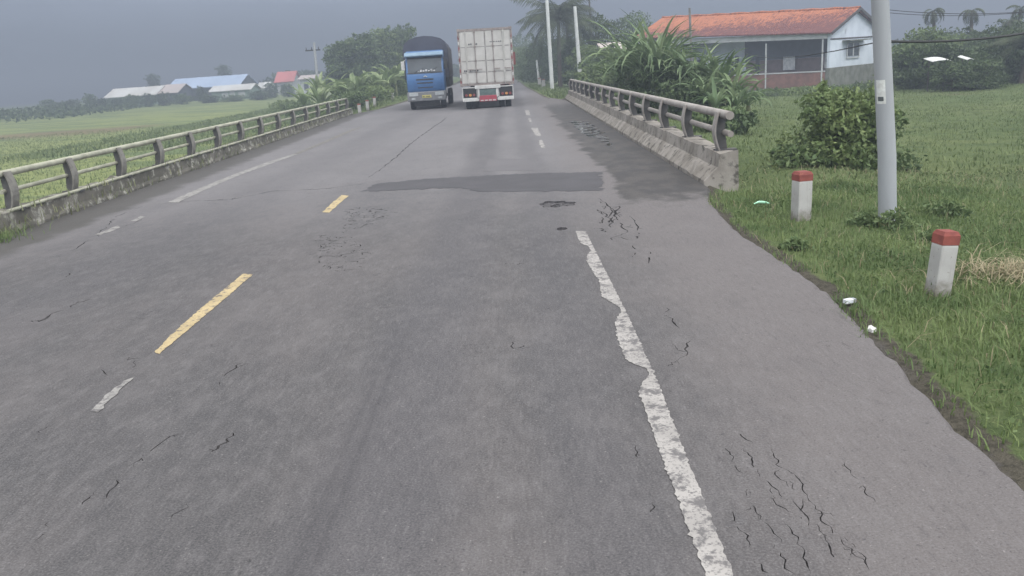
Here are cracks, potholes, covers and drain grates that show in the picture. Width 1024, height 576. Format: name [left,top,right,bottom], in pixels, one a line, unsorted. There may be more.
crack [597,199,651,263]
crack [727,435,869,575]
crack [40,433,188,537]
